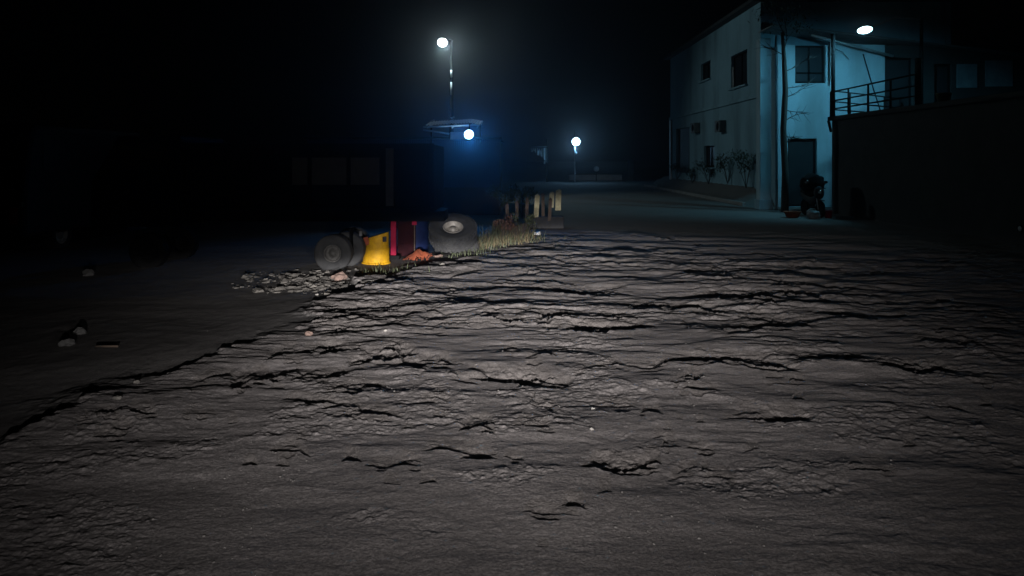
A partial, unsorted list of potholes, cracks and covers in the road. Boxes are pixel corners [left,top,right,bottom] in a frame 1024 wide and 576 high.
crack [440,275,593,304]
